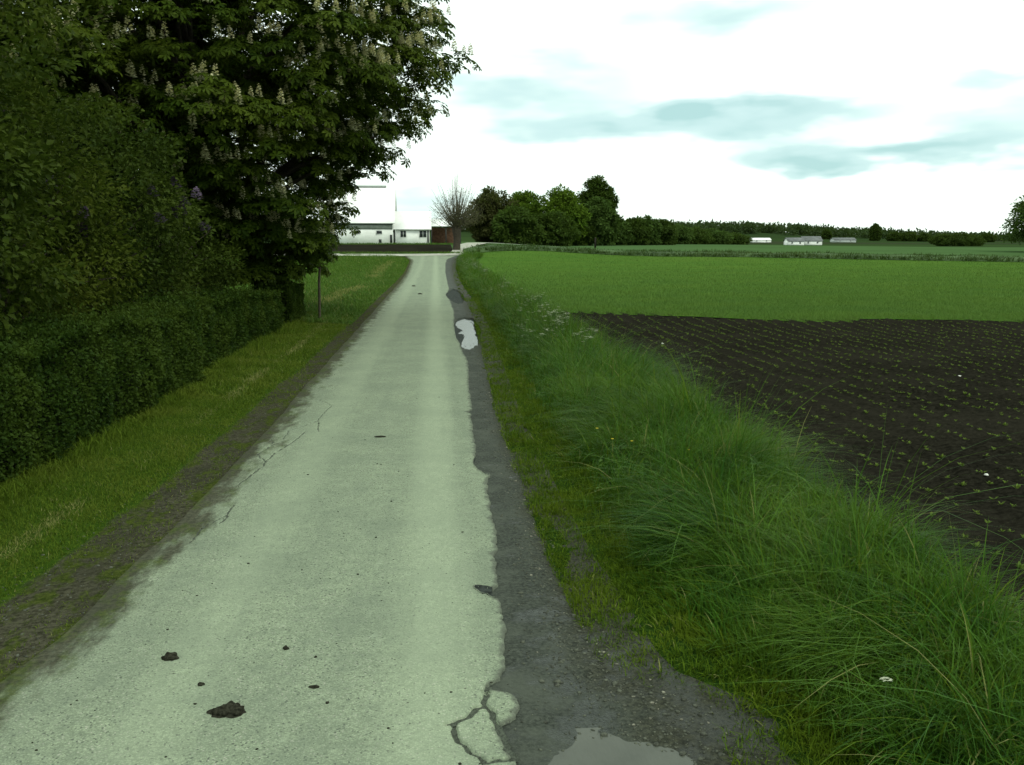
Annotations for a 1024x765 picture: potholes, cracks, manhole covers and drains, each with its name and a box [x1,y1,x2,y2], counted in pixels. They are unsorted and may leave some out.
pothole [473,584,495,598]
crack [447,687,519,765]
crack [238,400,330,485]
pothole [445,289,464,304]
pothole [452,318,478,350]
crack [189,505,235,543]
